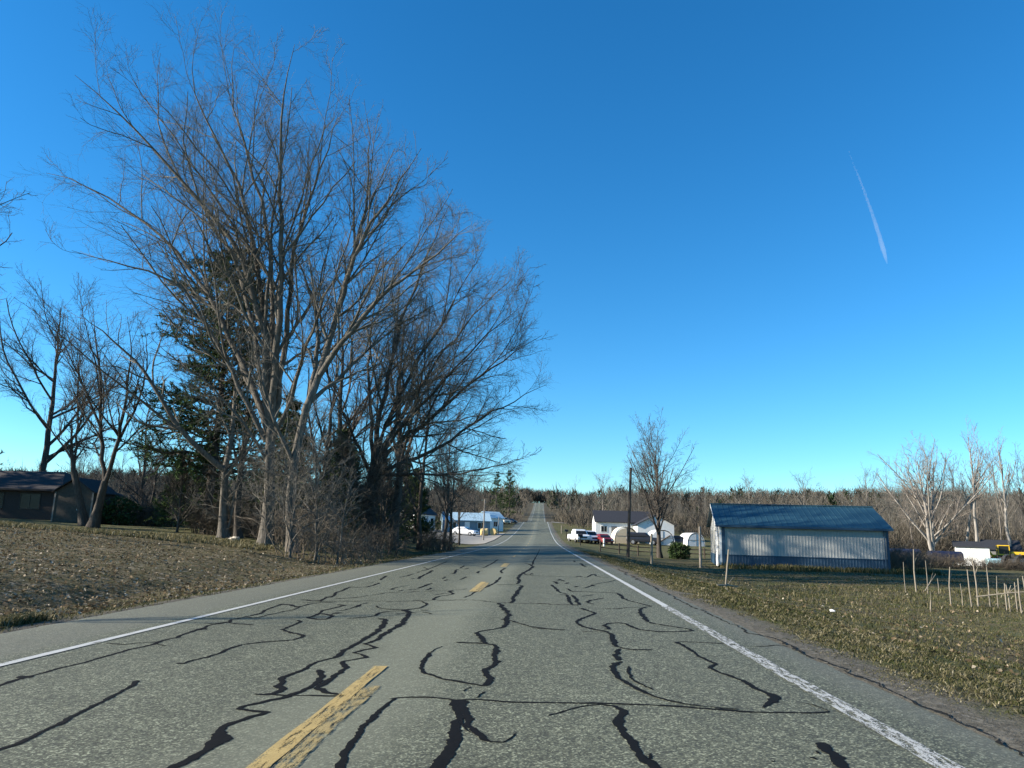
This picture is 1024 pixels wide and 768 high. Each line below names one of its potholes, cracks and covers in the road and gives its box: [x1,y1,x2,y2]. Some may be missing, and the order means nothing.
crack [302,589,461,603]
crack [618,569,1024,756]
